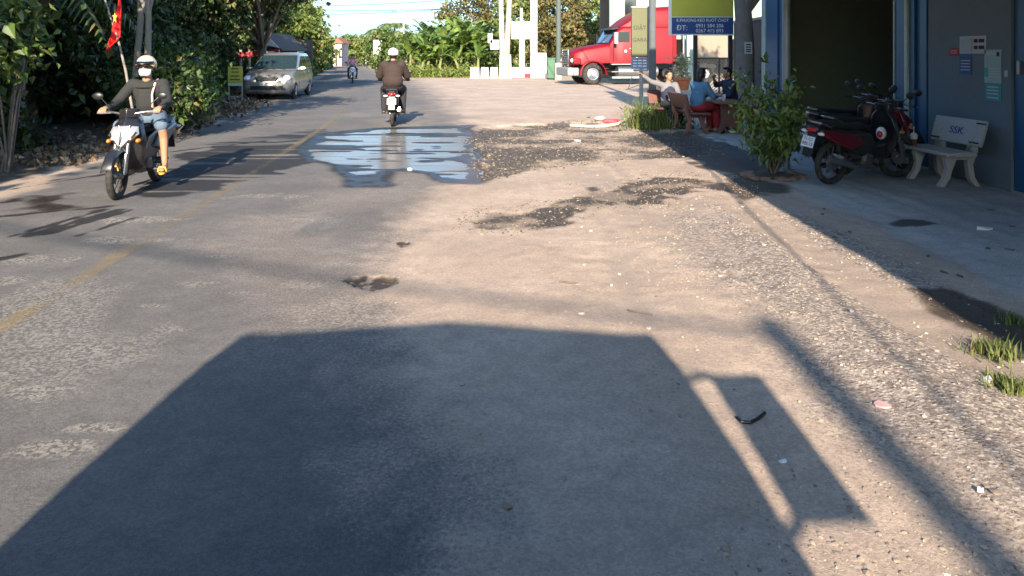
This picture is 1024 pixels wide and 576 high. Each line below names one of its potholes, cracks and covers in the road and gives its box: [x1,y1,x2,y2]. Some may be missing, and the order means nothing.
pothole [342,273,403,291]
pothole [463,121,718,181]
